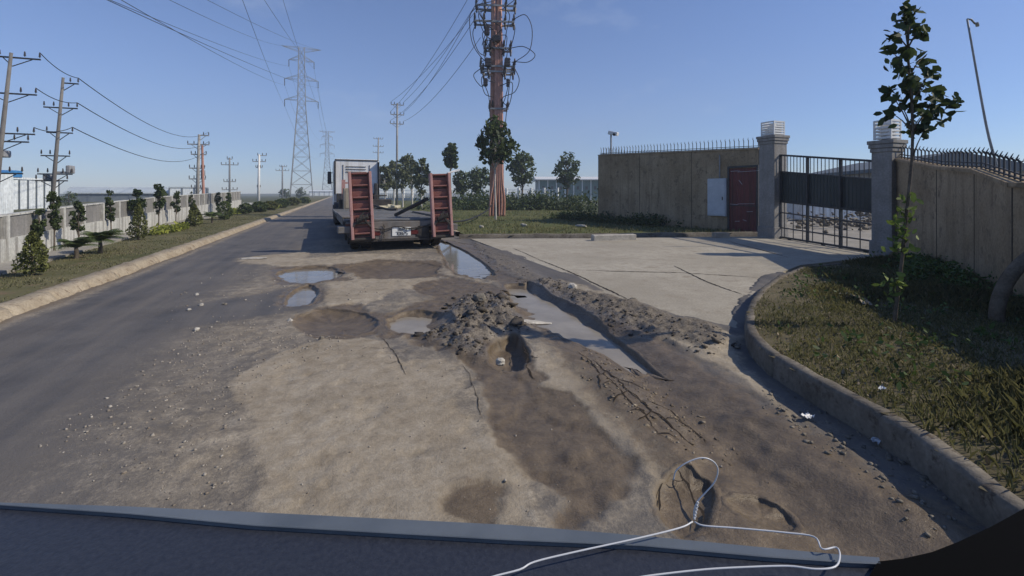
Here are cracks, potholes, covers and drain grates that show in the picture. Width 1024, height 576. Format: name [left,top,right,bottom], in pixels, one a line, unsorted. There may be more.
pothole [272,265,348,284]
pothole [647,460,723,540]
pothole [721,491,806,538]
pothole [436,240,498,279]
pothole [383,309,459,336]
pothole [499,281,673,381]
pothole [289,308,382,336]
pothole [482,331,534,374]
pothole [282,284,322,308]
crack [577,351,706,448]
